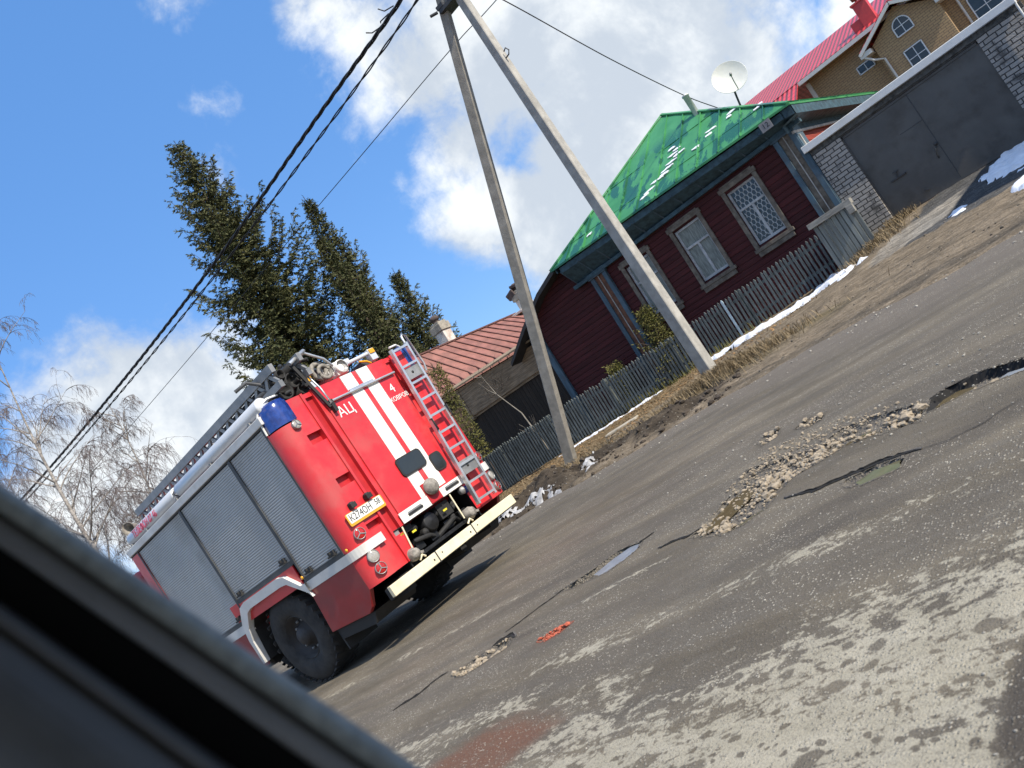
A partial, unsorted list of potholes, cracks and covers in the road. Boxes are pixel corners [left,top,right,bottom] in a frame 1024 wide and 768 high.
pothole [922,356,1024,415]
pothole [555,540,643,594]
pothole [455,637,512,678]
crack [639,529,698,548]
crack [784,447,922,498]
pothole [688,398,929,539]
crack [493,581,575,646]
crack [395,672,446,709]
